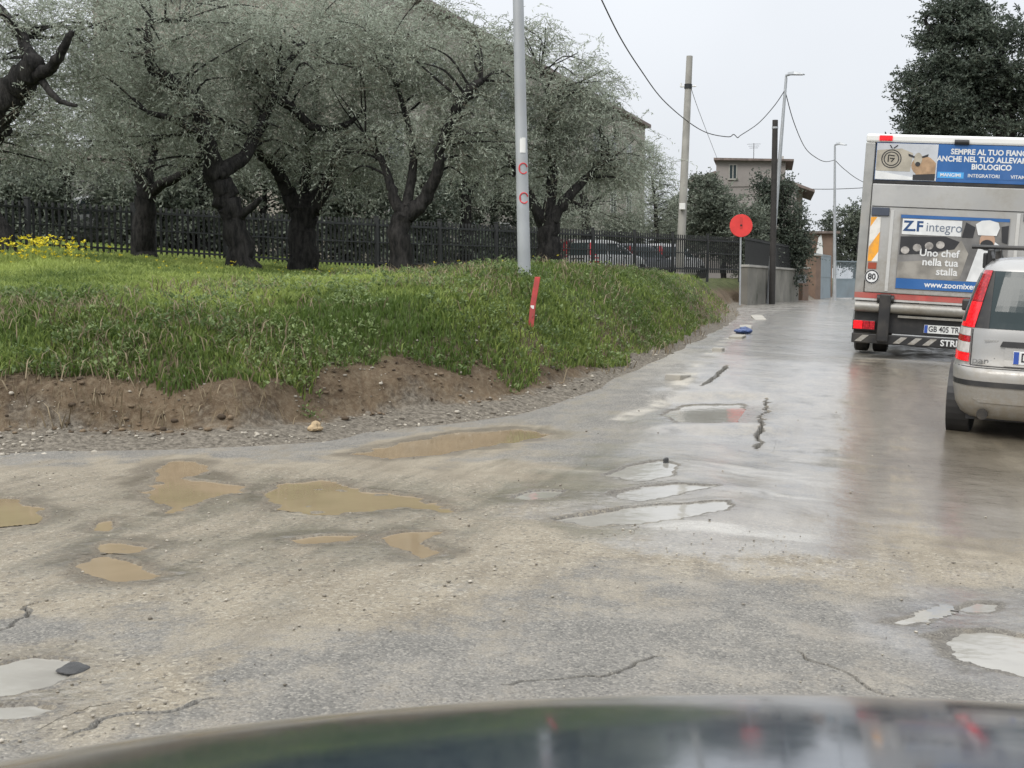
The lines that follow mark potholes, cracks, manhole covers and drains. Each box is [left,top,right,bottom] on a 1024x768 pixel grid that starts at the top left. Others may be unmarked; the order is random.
pothole [647,401,755,426]
pothole [118,457,263,520]
pothole [359,525,479,566]
pothole [328,426,564,462]
pothole [36,553,209,590]
pothole [579,457,706,485]
pothole [0,643,123,700]
pothole [0,495,74,529]
crack [754,640,943,699]
pothole [883,622,1024,693]
pothole [526,496,757,529]
